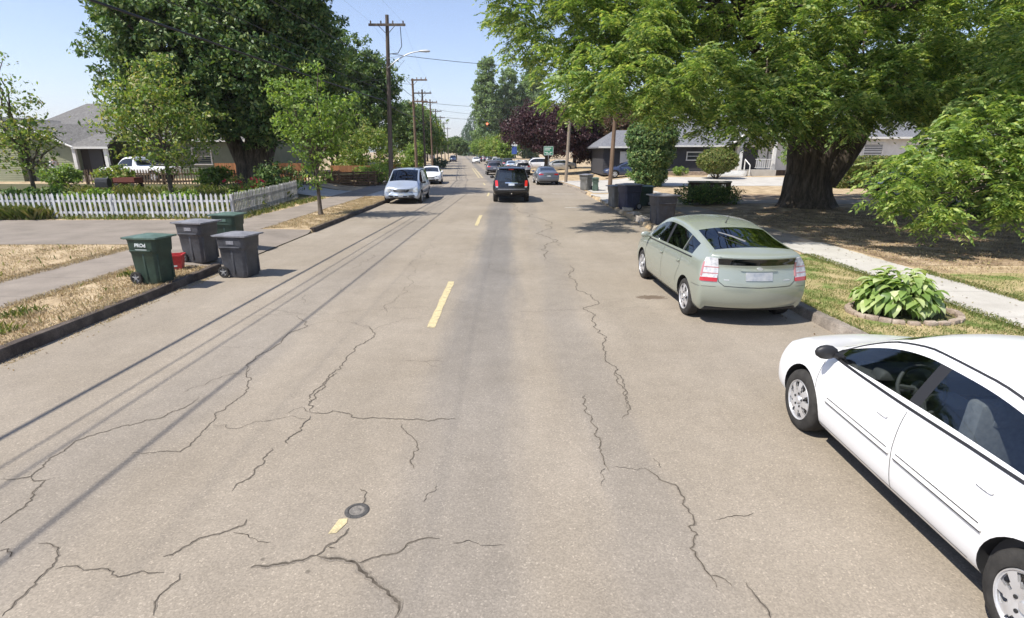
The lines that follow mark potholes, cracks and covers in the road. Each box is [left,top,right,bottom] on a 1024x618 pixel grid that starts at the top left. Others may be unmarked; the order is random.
crack [0,241,772,618]
utility cover [344,503,370,519]
